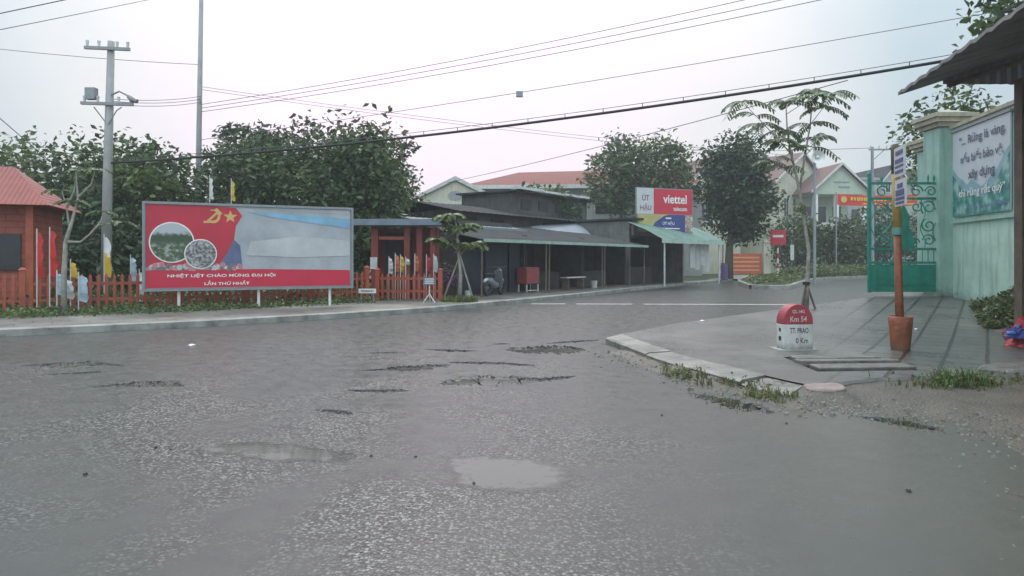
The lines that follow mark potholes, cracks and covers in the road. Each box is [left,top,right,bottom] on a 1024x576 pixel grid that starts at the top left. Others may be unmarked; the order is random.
pothole [506,345,586,355]
pothole [16,360,125,369]
pothole [440,375,578,386]
pothole [87,380,186,388]
pothole [356,364,451,372]
